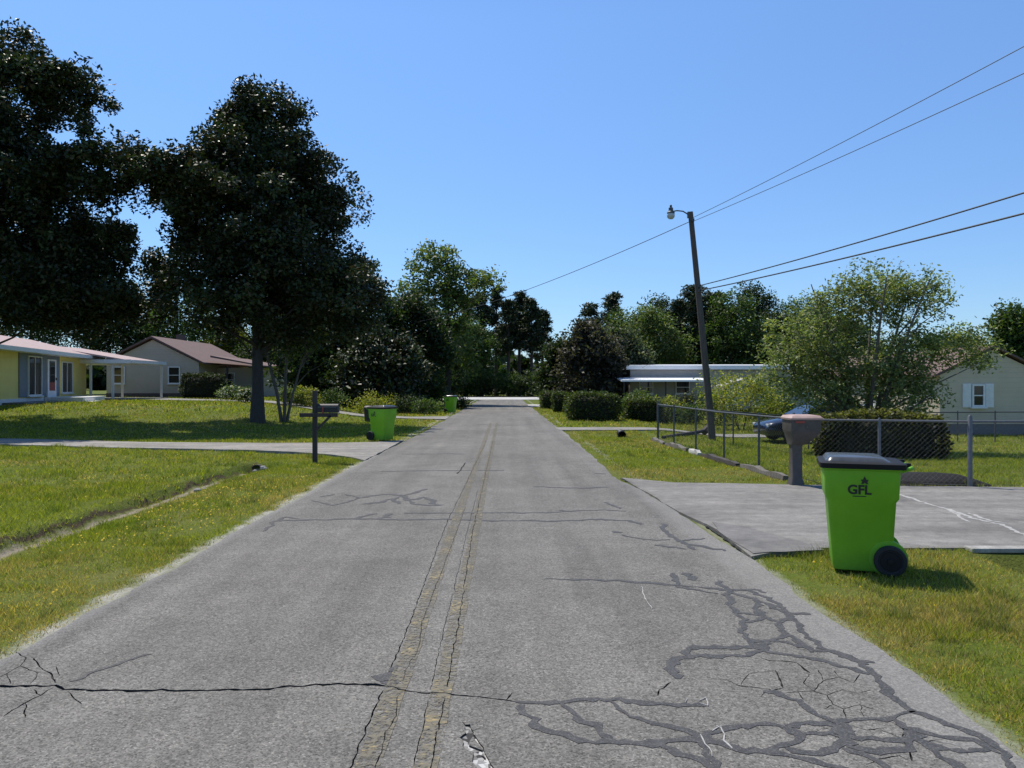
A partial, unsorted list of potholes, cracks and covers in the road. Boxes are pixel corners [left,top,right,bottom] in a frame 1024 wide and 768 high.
crack [0,446,1016,768]
